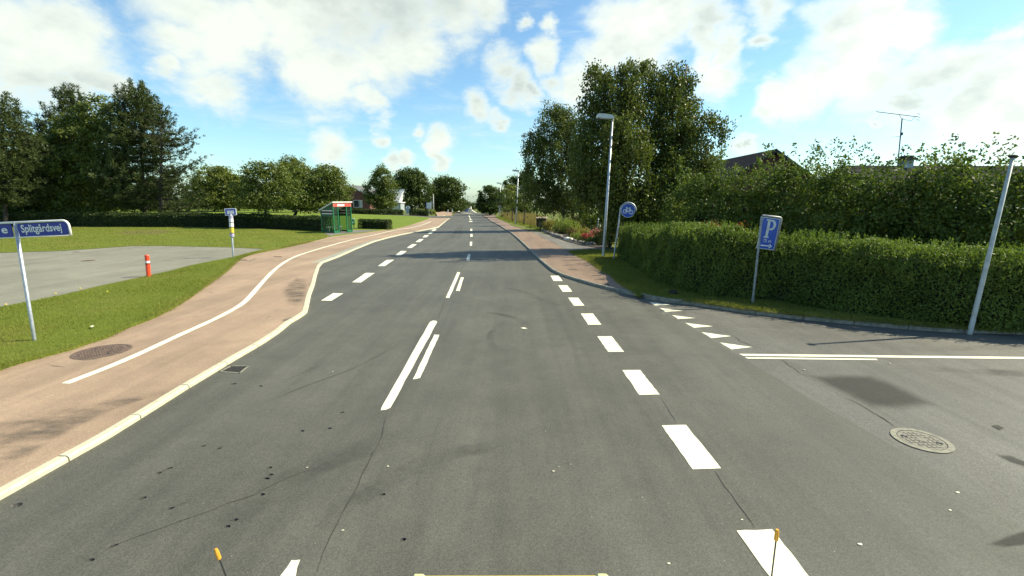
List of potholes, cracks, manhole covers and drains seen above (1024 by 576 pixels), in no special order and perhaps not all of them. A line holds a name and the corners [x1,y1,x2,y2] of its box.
crack [269,348,391,401]
manhole cover [70,344,133,359]
manhole cover [890,428,955,453]
crack [94,462,327,558]
drain grate [219,365,250,373]
